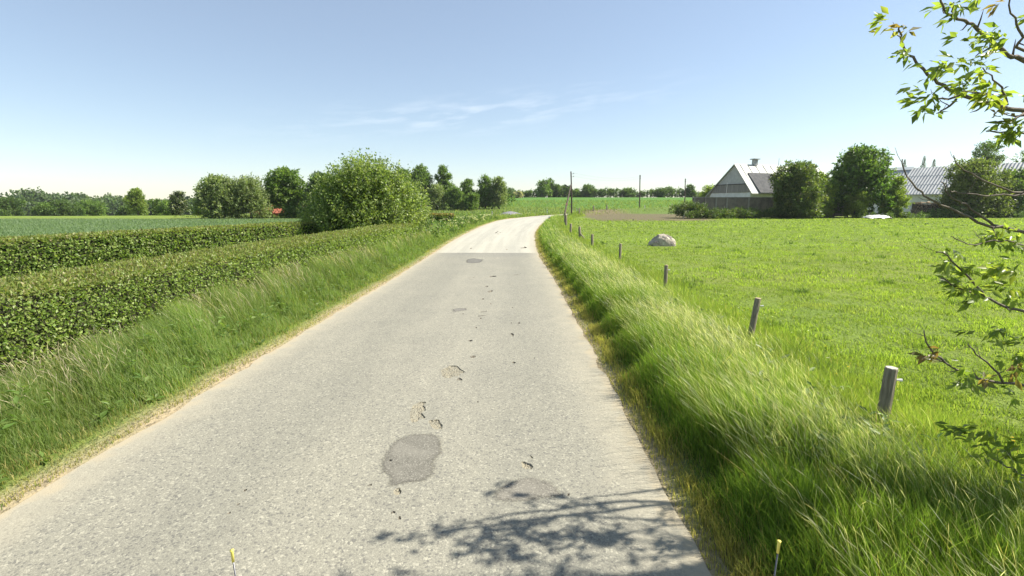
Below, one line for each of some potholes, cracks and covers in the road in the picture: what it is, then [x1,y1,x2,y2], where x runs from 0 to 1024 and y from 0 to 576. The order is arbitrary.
pothole [441,365,465,378]
pothole [410,402,426,422]
pothole [428,419,443,429]
